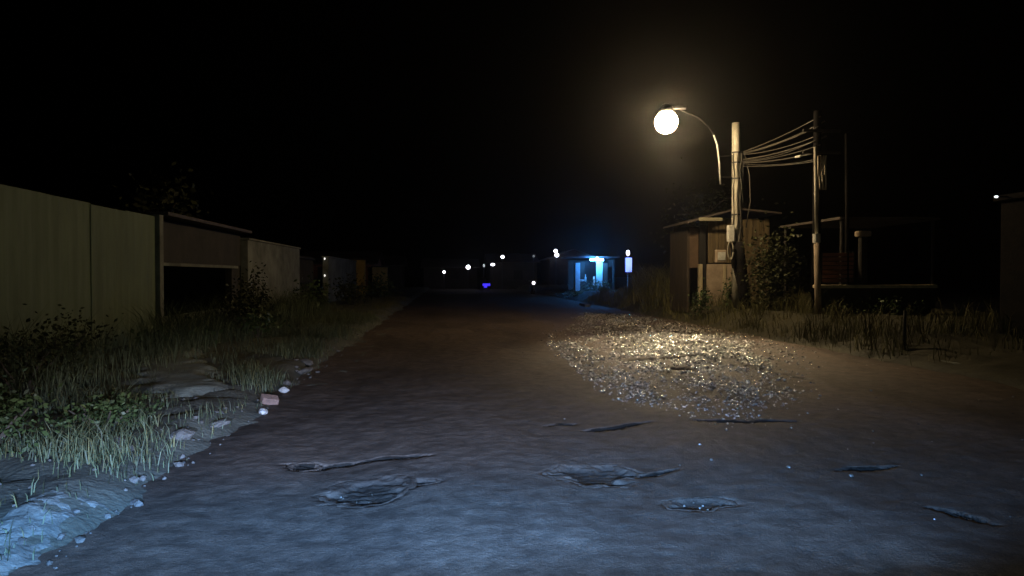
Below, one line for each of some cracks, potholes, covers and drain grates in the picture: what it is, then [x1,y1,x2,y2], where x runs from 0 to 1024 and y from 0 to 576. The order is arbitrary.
crack [637,469,677,478]
pothole [662,497,738,512]
pothole [542,461,640,488]
crack [286,455,423,471]
crack [925,507,997,526]
crack [549,422,650,432]
pothole [314,474,418,508]
